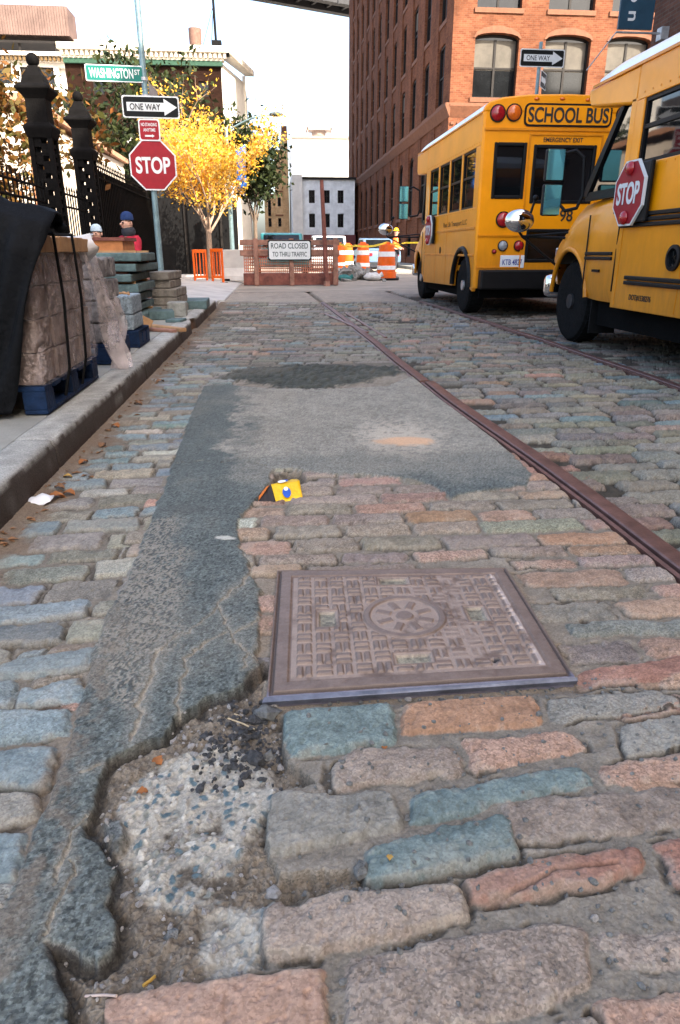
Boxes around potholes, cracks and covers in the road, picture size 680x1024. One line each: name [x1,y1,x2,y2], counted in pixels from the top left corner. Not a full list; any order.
manhole cover [262,568,578,707]
pothole [49,661,367,1024]
crack [128,548,263,742]
